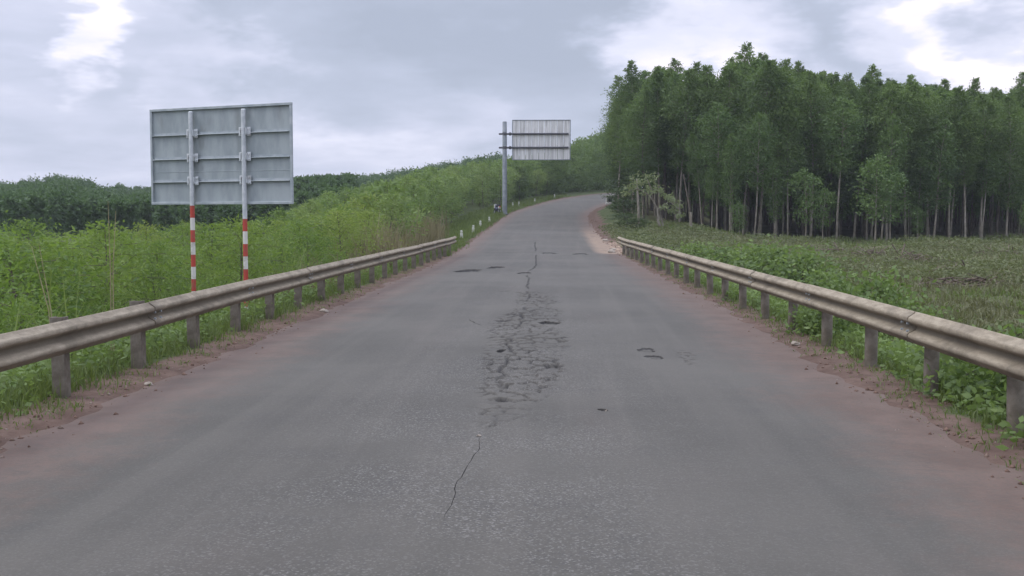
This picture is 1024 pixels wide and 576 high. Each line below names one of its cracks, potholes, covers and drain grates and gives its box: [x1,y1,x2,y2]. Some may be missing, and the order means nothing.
crack [444,242,581,517]
